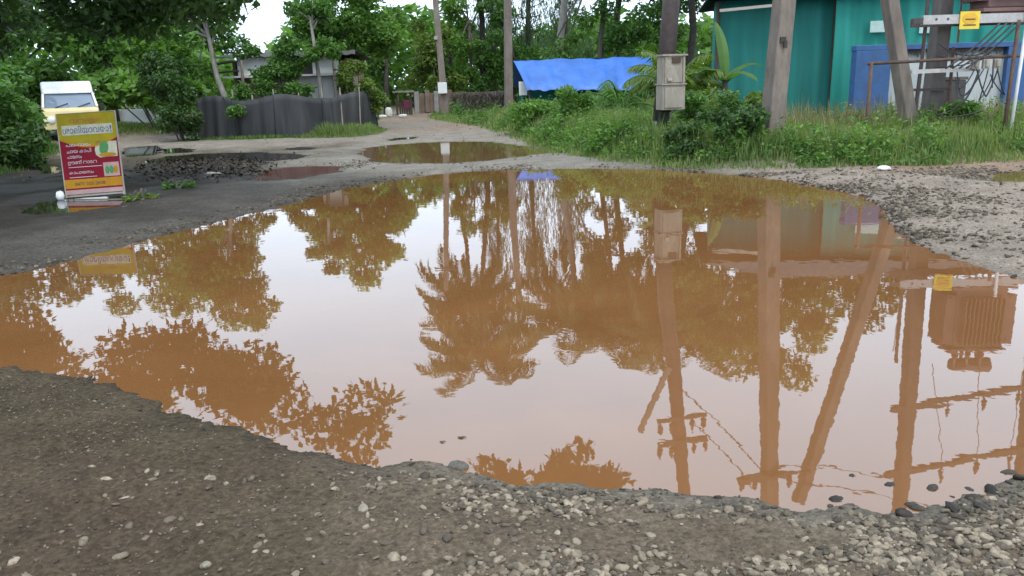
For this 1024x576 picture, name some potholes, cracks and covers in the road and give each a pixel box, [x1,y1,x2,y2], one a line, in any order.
pothole [0,168,1024,514]
pothole [36,165,61,174]
pothole [357,141,548,164]
